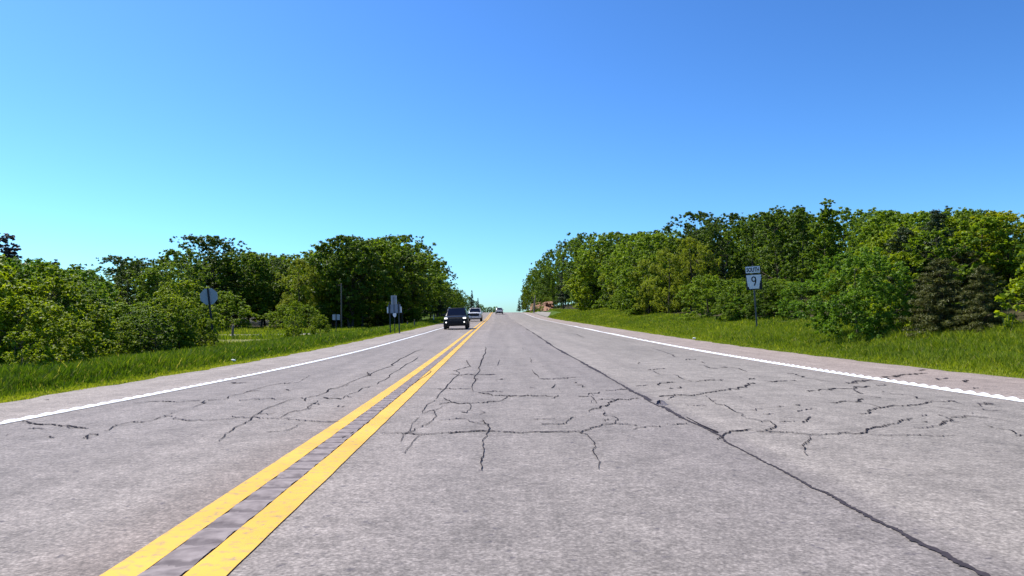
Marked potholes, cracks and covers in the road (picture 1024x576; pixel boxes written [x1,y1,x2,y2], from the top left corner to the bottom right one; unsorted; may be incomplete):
crack [7,349,1021,470]
